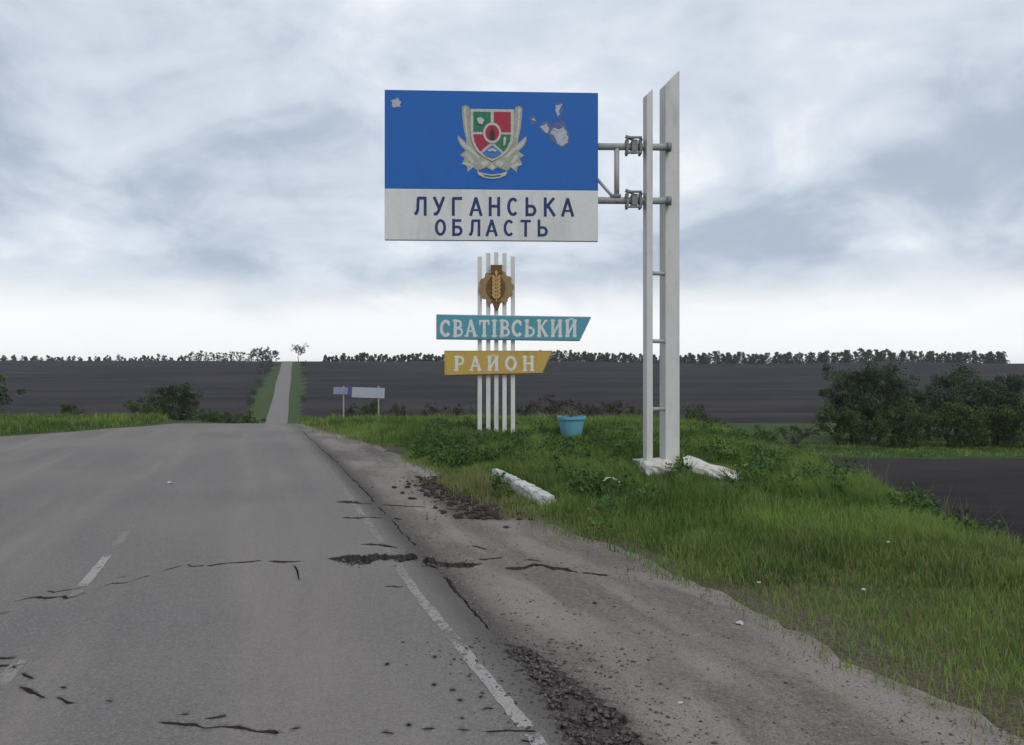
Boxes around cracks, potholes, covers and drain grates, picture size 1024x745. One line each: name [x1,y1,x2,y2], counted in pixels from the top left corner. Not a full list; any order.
crack [0,431,790,745]
pothole [328,551,420,567]
pothole [422,554,482,569]
